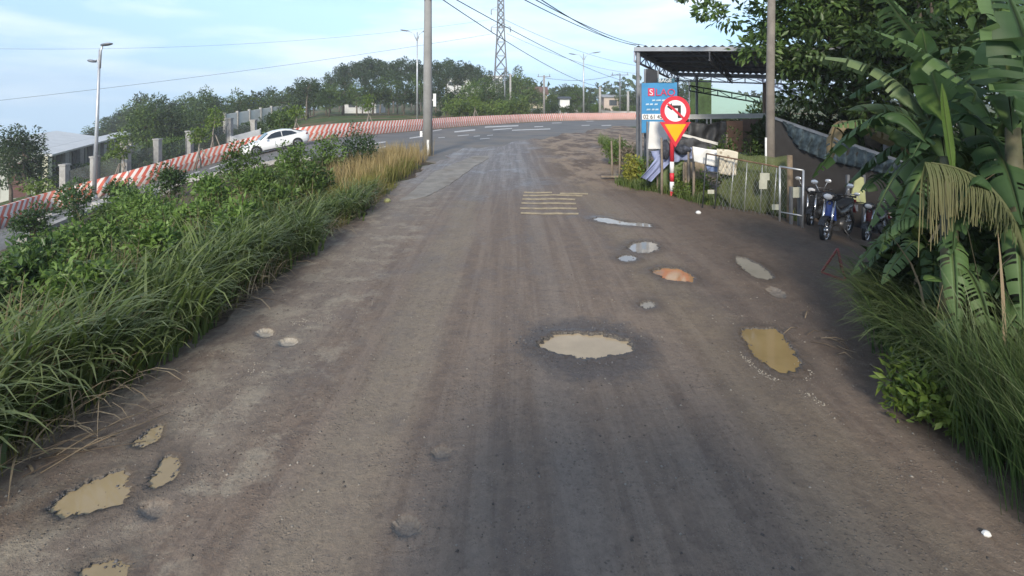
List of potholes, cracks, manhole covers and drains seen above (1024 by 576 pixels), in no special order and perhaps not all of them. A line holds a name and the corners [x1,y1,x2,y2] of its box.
pothole [586,216,659,228]
pothole [757,284,796,301]
pothole [730,254,780,283]
pothole [731,322,814,380]
pothole [266,333,308,351]
pothole [620,239,668,255]
pothole [245,324,284,342]
pothole [644,264,703,285]
pothole [526,327,646,365]
pothole [23,457,152,534]
